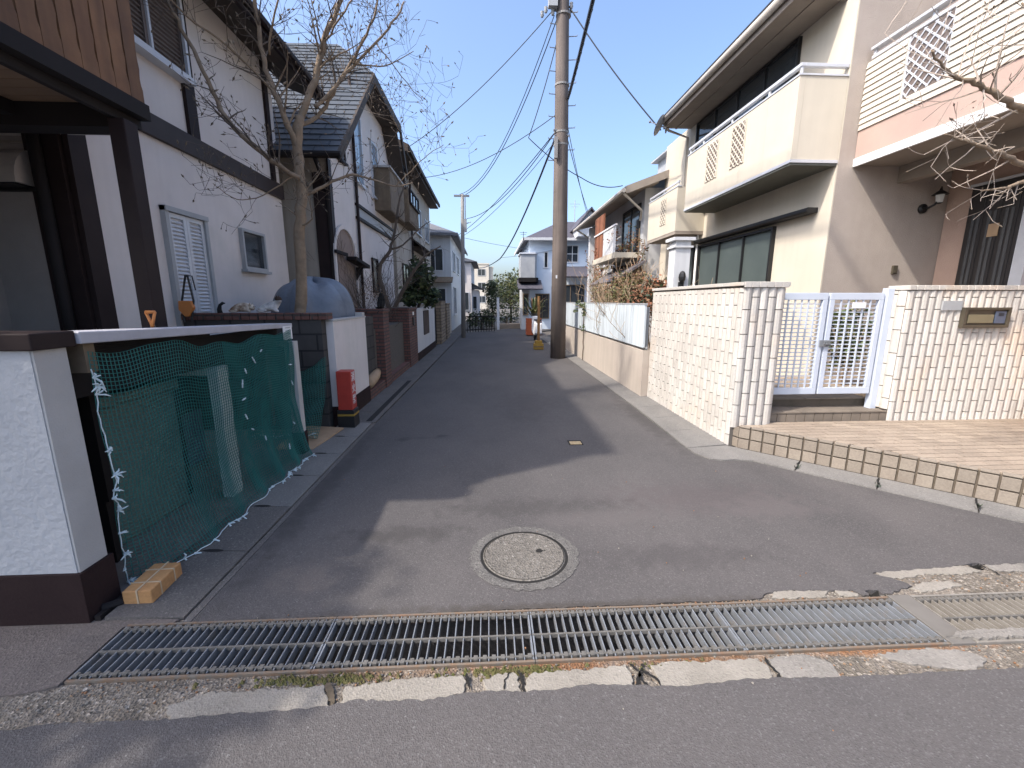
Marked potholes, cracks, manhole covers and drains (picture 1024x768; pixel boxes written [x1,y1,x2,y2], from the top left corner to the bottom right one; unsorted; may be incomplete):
drain grate [64,616,337,685]
drain grate [712,596,951,655]
crack [630,663,661,685]
crack [764,657,780,677]
drain grate [311,609,535,674]
drain grate [910,591,1024,645]
drain grate [529,603,748,664]
manhole cover [468,526,579,591]
